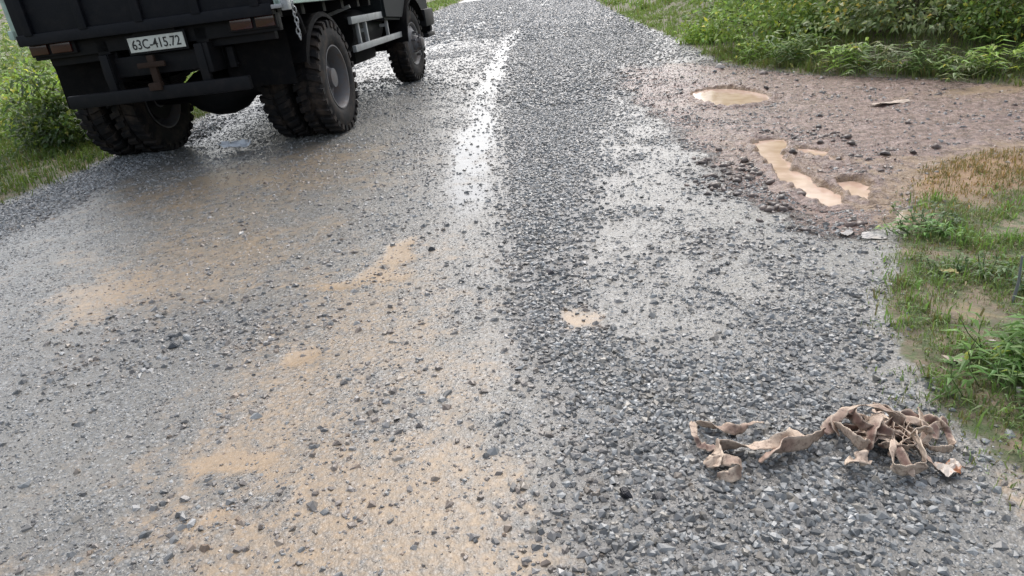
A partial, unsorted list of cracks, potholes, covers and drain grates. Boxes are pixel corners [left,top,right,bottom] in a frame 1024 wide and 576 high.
pothole [737,134,896,212]
pothole [679,82,783,110]
